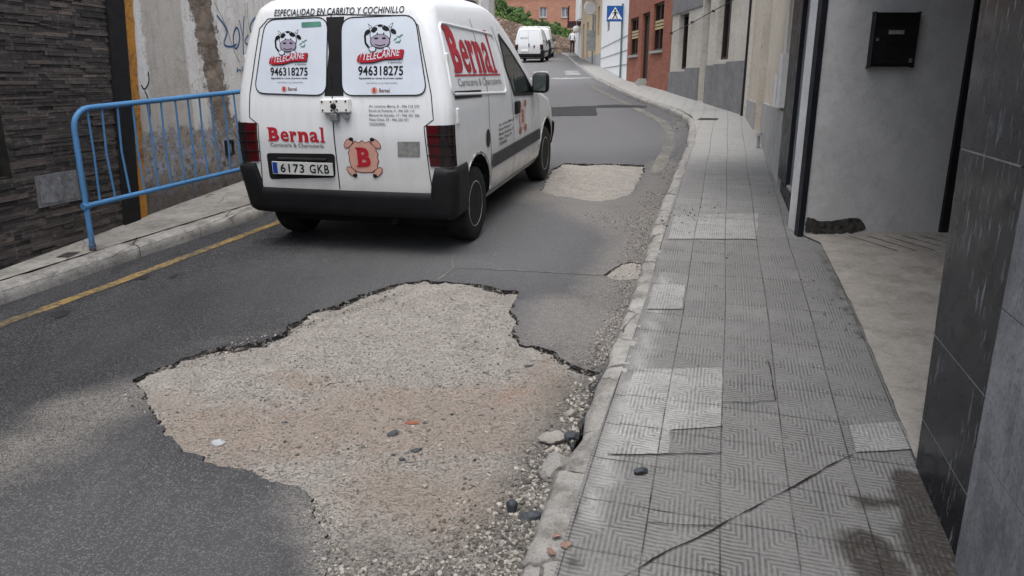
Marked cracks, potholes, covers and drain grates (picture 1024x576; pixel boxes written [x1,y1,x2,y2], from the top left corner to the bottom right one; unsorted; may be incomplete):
pothole [133,280,601,576]
pothole [604,262,642,280]
crack [435,249,606,281]
crack [625,454,853,576]
pothole [540,163,646,201]
